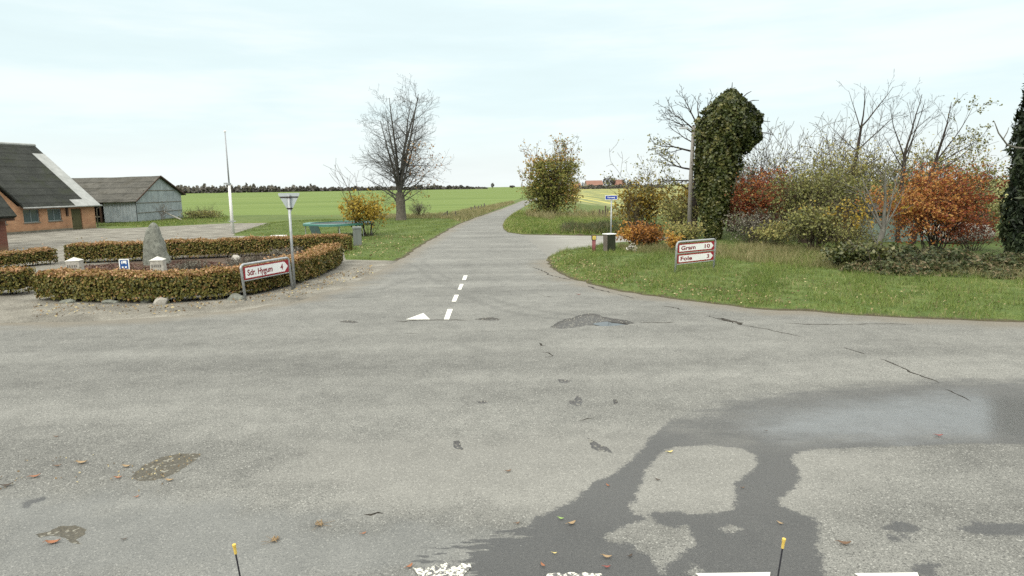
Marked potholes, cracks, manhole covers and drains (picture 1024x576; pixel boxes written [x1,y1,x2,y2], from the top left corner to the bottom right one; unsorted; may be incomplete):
pothole [132,453,201,481]
crack [882,359,970,401]
pothole [587,437,613,453]
pothole [35,525,87,544]
pothole [551,313,634,329]
crack [709,316,912,336]
